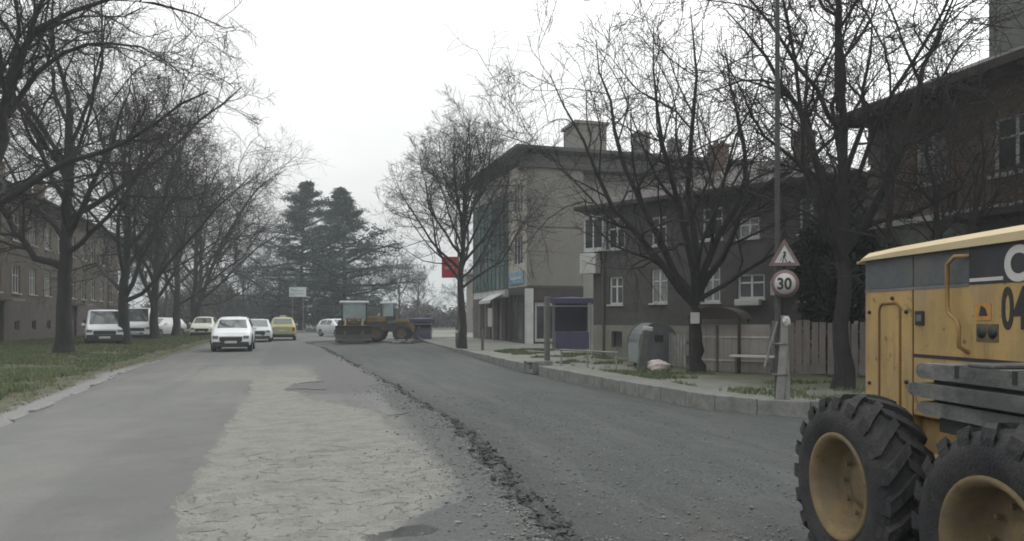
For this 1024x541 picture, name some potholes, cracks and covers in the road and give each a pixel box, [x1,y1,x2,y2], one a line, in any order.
pothole [361,524,443,541]
crack [185,441,459,541]
